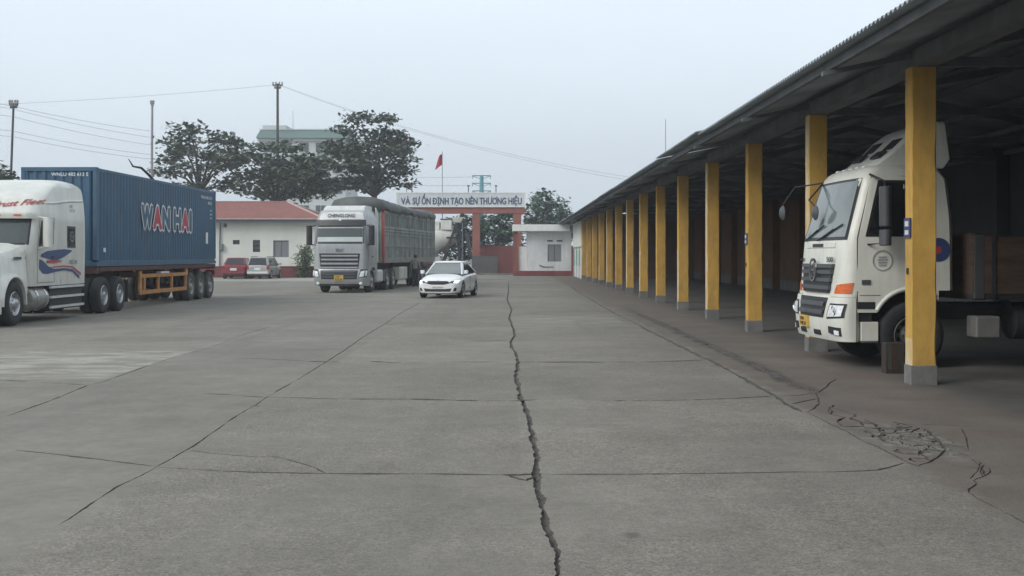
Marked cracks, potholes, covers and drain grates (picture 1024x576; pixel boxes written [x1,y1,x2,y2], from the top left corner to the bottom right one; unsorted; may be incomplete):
crack [573,288,1024,523]
crack [507,281,561,576]
